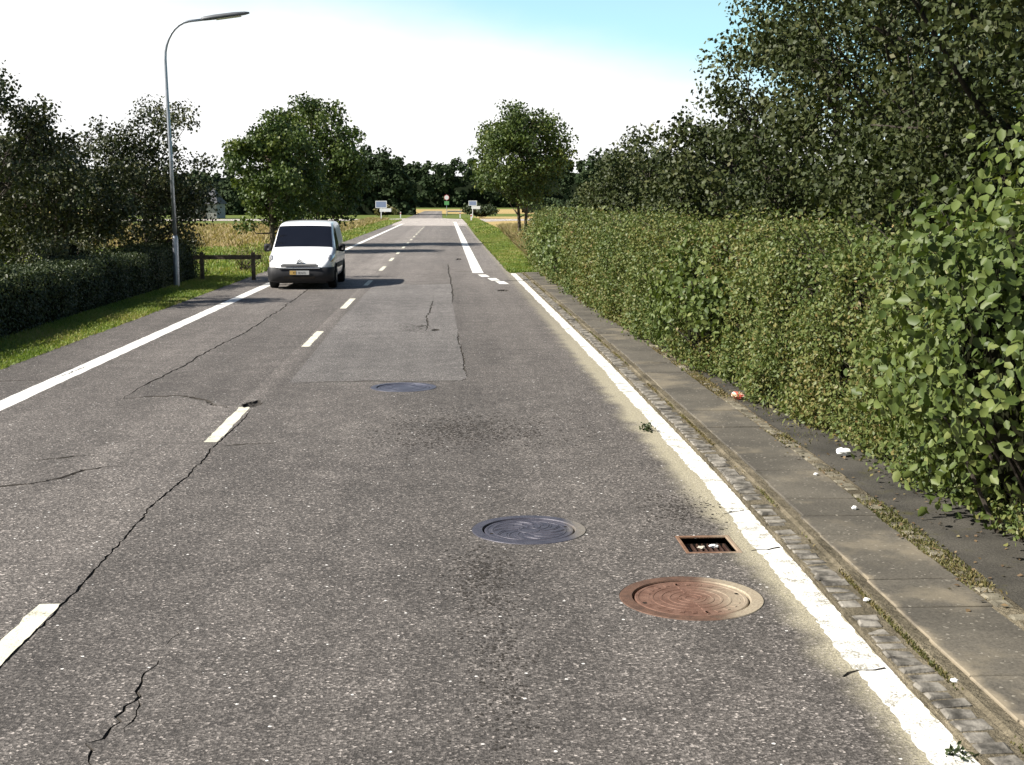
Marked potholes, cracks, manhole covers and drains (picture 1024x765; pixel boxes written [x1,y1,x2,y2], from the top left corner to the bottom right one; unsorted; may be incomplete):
manhole cover [619,576,765,621]
crack [420,265,454,331]
drain grate [675,535,743,553]
manhole cover [371,382,437,392]
crack [0,412,269,765]
manhole cover [472,515,587,545]
